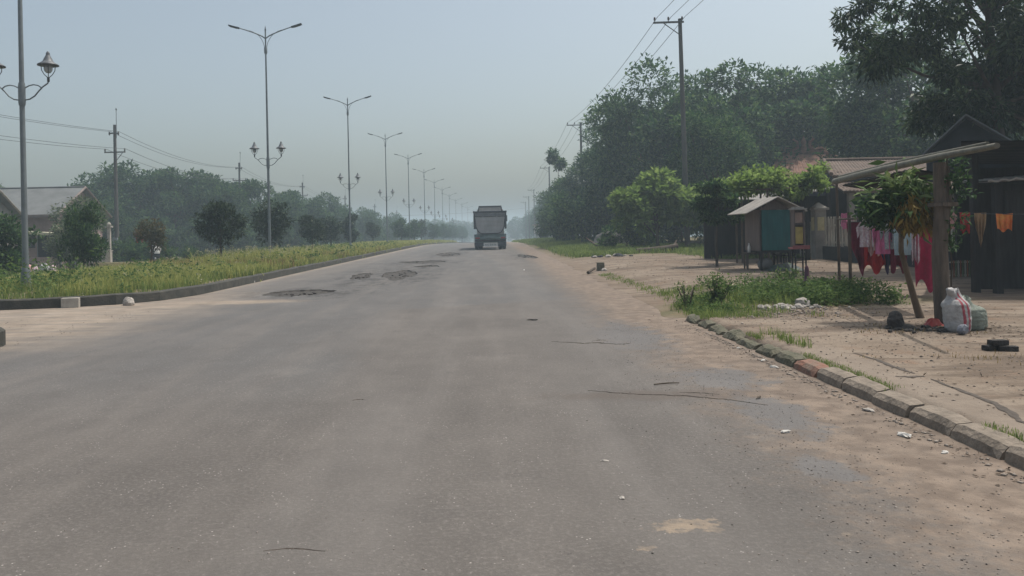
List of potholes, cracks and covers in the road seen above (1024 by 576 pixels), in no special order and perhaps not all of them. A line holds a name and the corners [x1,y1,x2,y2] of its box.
pothole [262,289,337,297]
pothole [382,270,418,281]
crack [589,390,764,405]
